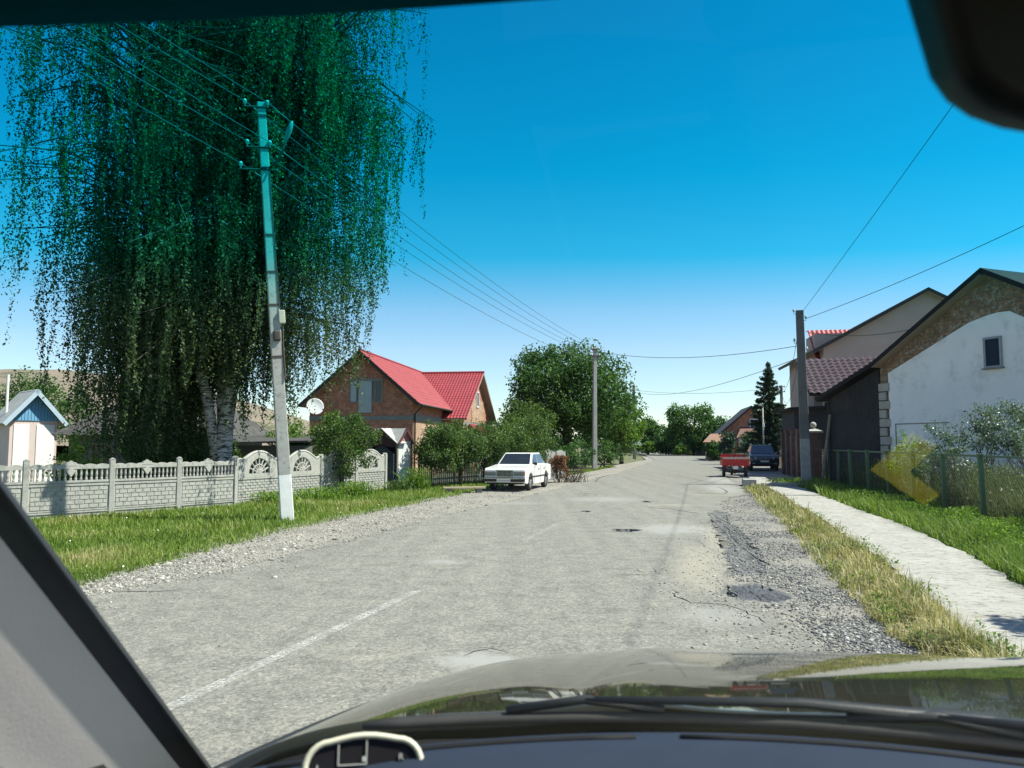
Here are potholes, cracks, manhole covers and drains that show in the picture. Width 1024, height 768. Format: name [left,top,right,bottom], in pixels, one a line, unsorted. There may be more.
crack [673,591,765,623]
pothole [719,583,793,603]
pothole [708,510,769,575]
